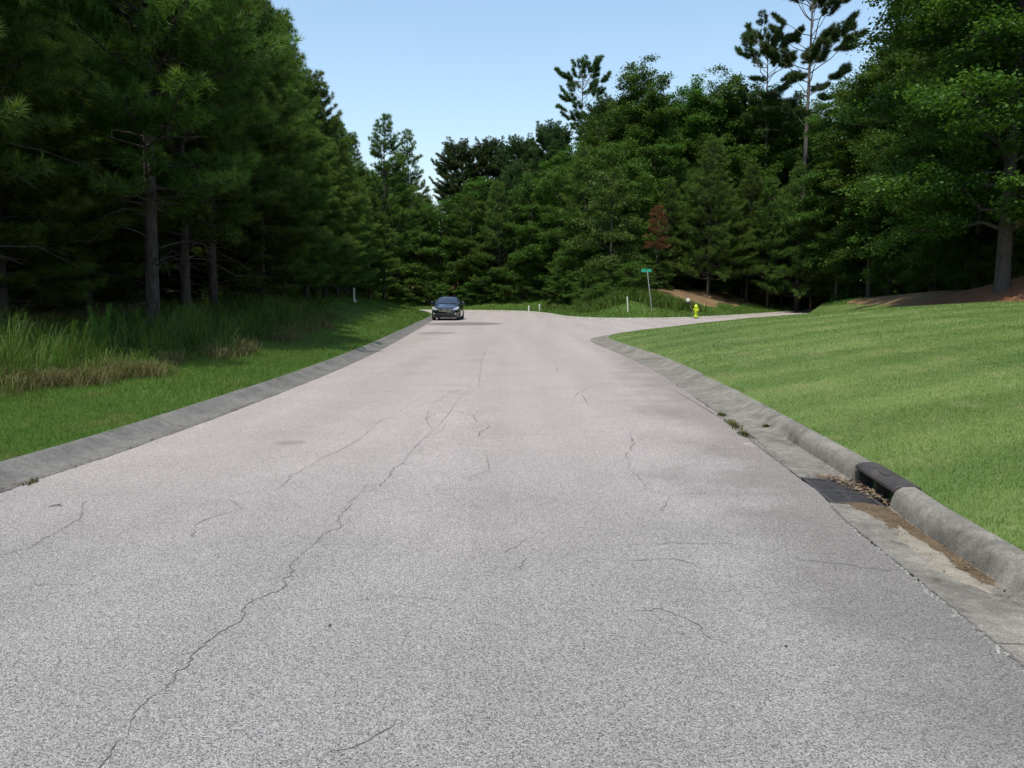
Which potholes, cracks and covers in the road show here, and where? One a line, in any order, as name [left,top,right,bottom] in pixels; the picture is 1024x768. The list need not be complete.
crack [625,434,699,512]
crack [633,602,712,639]
drain grate [801,462,921,508]
crack [98,353,485,768]
